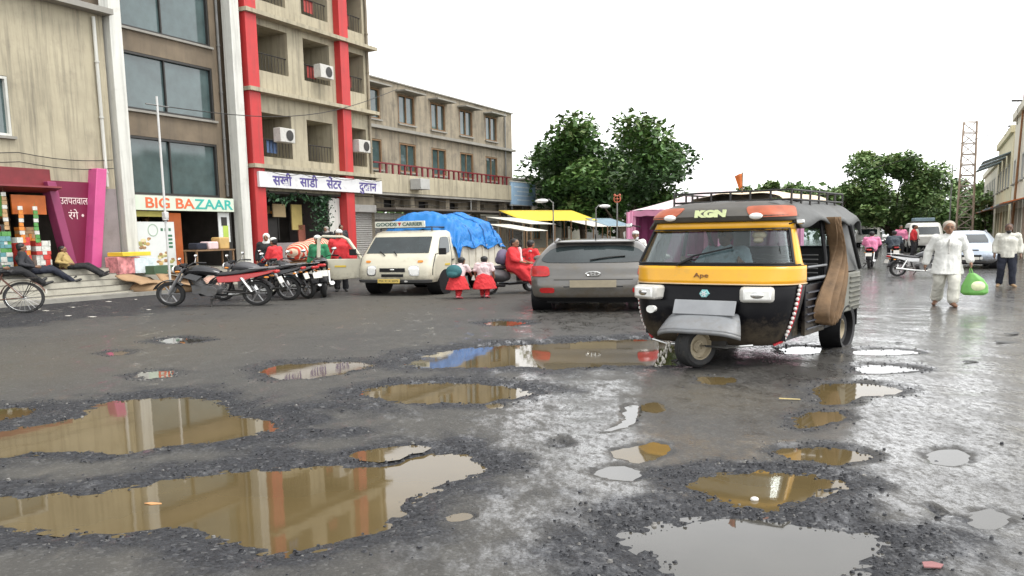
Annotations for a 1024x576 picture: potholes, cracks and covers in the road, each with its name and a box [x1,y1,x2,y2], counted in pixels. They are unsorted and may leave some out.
pothole [589,460,661,482]
pothole [137,334,220,345]
pothole [960,504,1024,529]
pothole [225,355,394,383]
pothole [323,375,567,408]
pothole [118,367,195,381]
pothole [473,318,541,327]
pothole [0,437,540,575]
pothole [641,400,676,414]
pothole [652,457,887,522]
pothole [373,335,719,373]
pothole [0,387,328,467]
